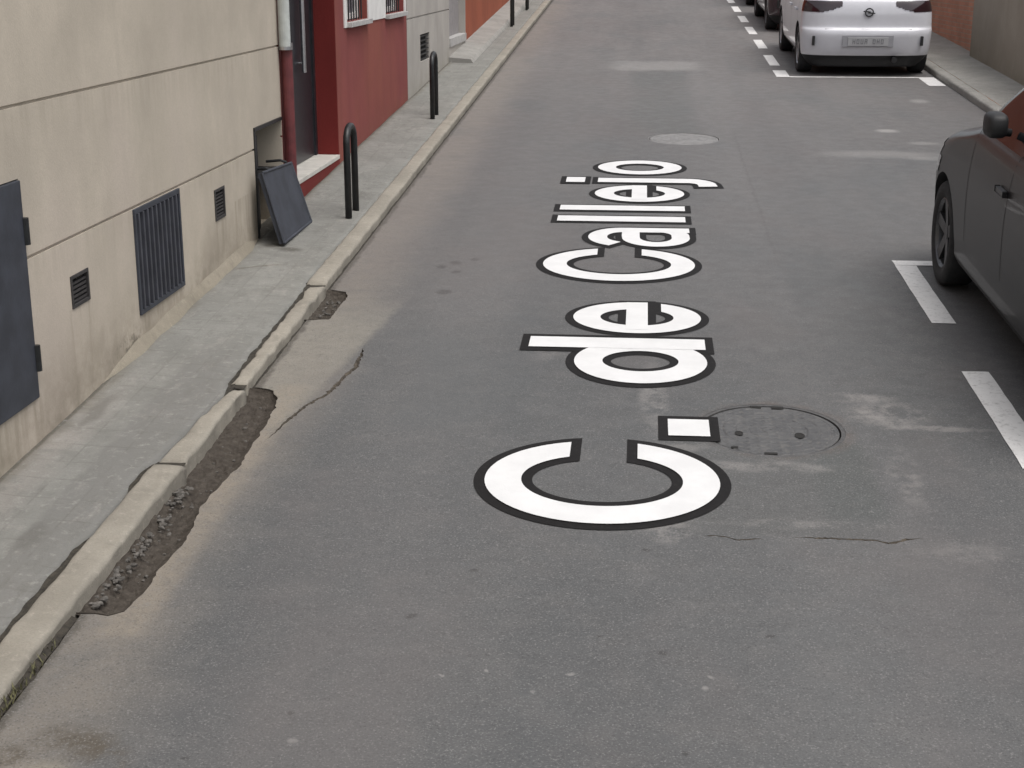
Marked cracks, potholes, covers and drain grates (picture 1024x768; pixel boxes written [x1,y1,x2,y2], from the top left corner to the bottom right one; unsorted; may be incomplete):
manhole cover [648,133,720,145]
pothole [75,388,278,616]
pothole [304,290,347,322]
crack [0,0,553,718]
manhole cover [703,405,846,457]
crack [709,535,914,544]
